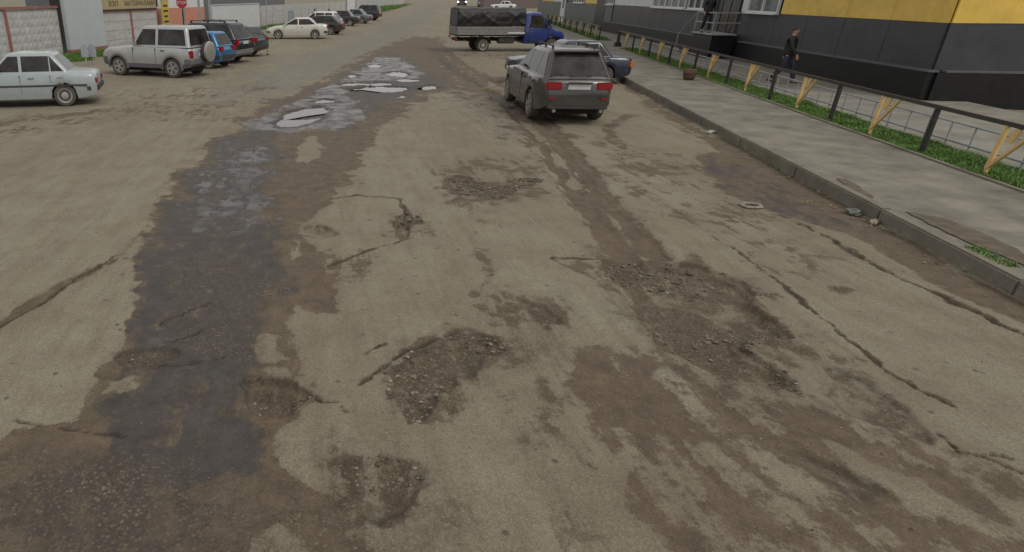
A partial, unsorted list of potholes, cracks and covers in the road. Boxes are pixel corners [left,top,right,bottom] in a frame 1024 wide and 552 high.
pothole [114,345,184,370]
pothole [601,259,801,392]
crack [0,252,123,329]
pothole [342,85,414,94]
pothole [341,454,437,527]
pothole [271,104,335,124]
pothole [240,374,313,418]
crack [327,194,412,267]
pothole [392,326,509,423]
crack [357,336,440,386]
crack [935,433,1024,475]
pothole [445,174,540,201]
